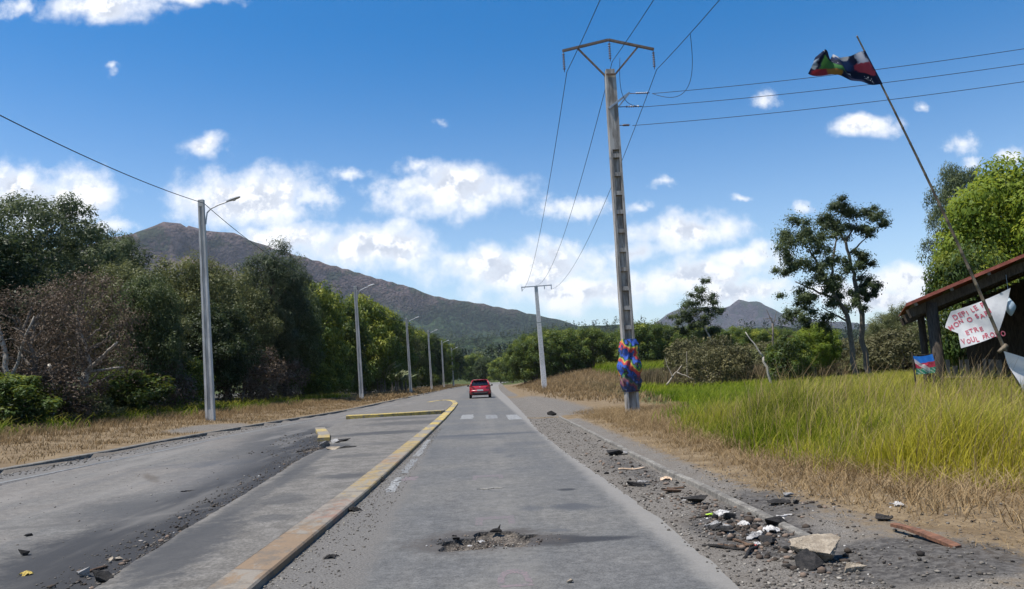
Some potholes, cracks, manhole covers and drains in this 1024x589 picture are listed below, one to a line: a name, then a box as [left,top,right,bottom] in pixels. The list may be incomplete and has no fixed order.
pothole [436,531,541,552]
